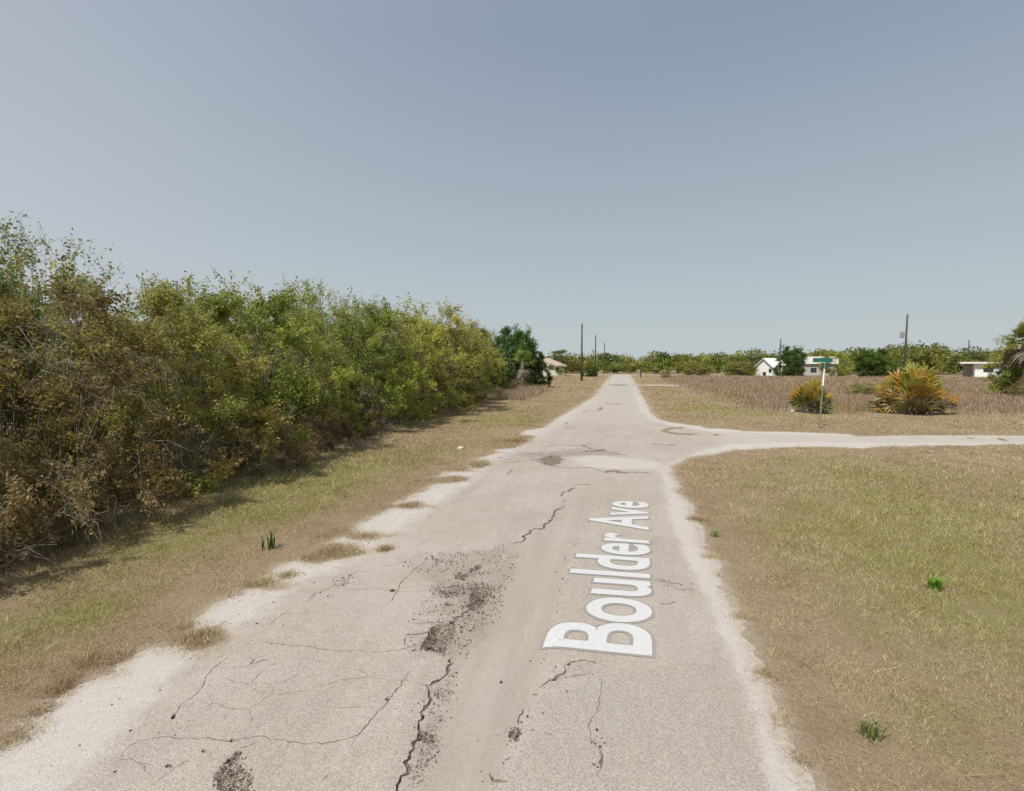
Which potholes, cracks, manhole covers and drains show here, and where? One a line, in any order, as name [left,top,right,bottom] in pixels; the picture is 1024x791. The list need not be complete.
crack [120,562,469,791]
pothole [212,751,254,791]
crack [496,445,648,544]
crack [541,659,603,779]
pothole [467,586,493,610]
pothole [537,455,565,466]
pothole [419,624,456,654]
